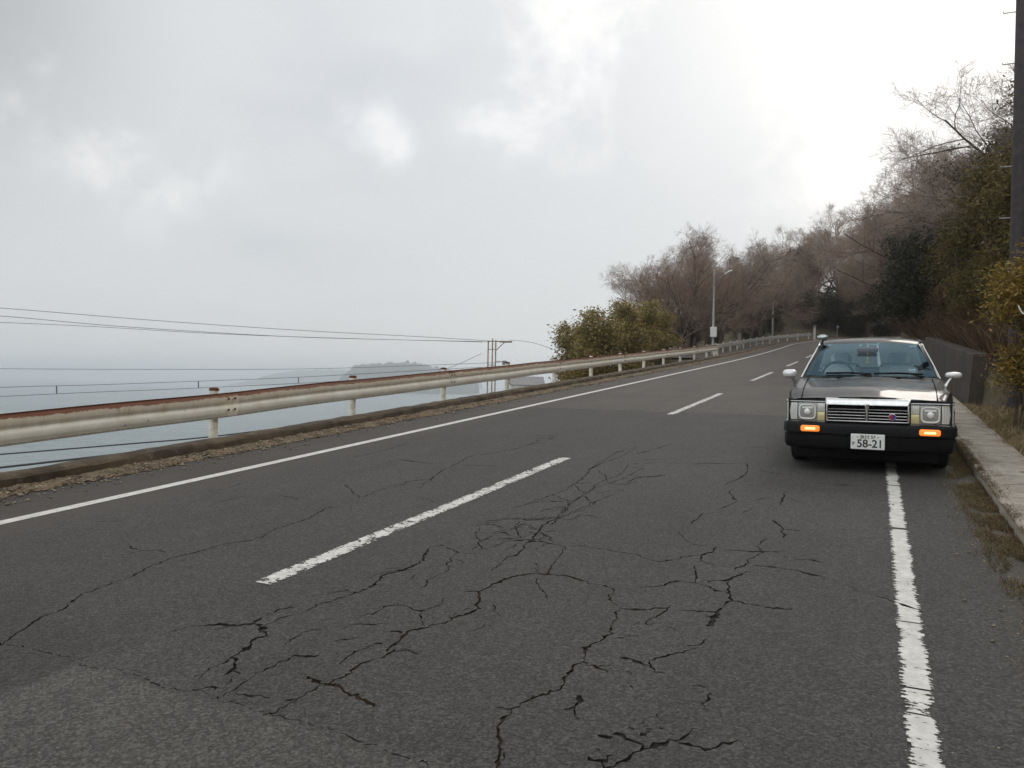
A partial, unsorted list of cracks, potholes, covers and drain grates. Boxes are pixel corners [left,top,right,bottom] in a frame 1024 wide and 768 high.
crack [161,445,922,768]
crack [1,507,332,645]
